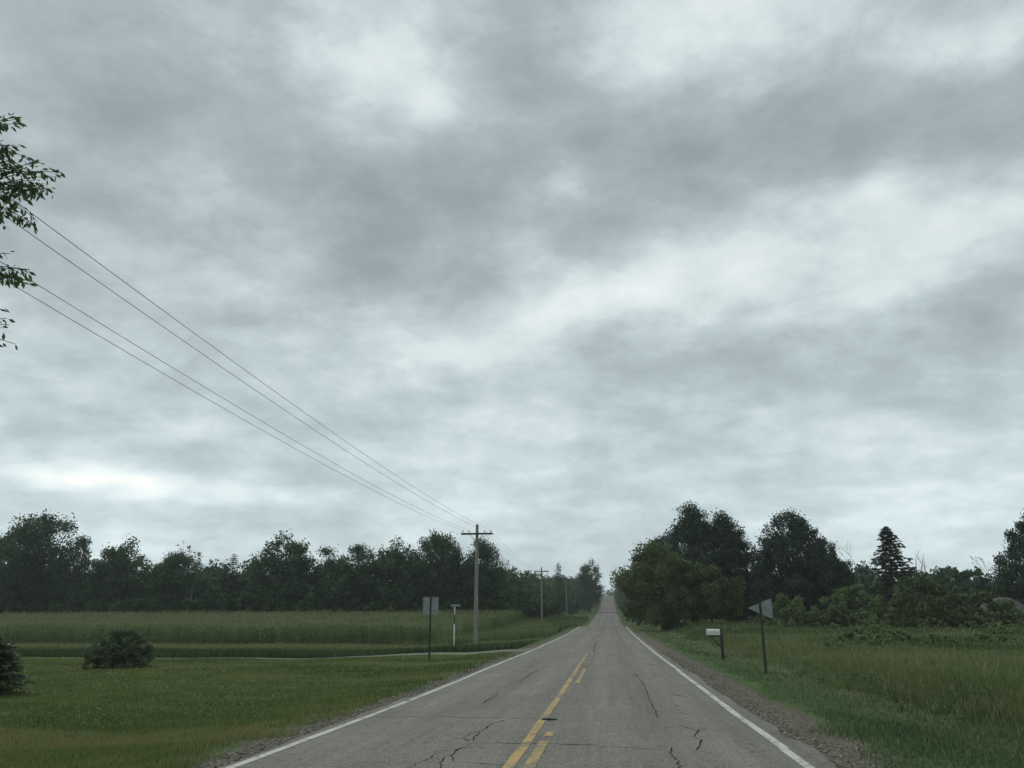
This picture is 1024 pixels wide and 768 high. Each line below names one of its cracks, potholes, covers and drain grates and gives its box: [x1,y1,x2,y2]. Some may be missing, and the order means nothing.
crack [509,663,716,768]
crack [408,693,587,768]
